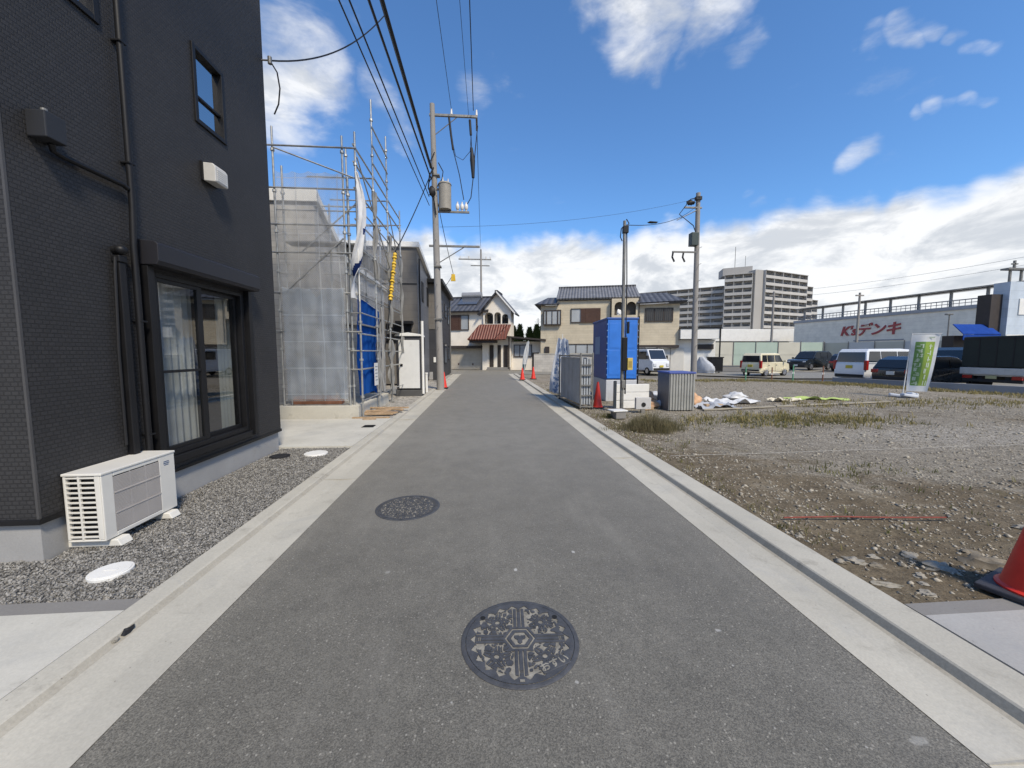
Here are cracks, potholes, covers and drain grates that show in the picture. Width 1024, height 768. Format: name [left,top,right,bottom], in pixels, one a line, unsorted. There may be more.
manhole cover [461,601,579,690]
manhole cover [375,495,440,521]
